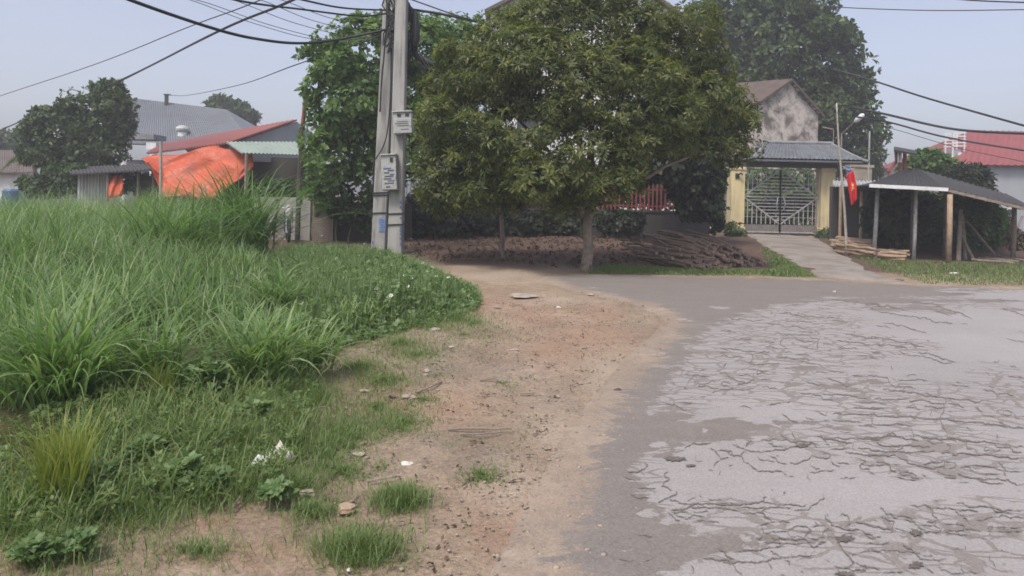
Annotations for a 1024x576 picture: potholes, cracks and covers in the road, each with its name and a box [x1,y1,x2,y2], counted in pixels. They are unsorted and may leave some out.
crack [663,293,1024,491]
crack [626,463,1024,576]
